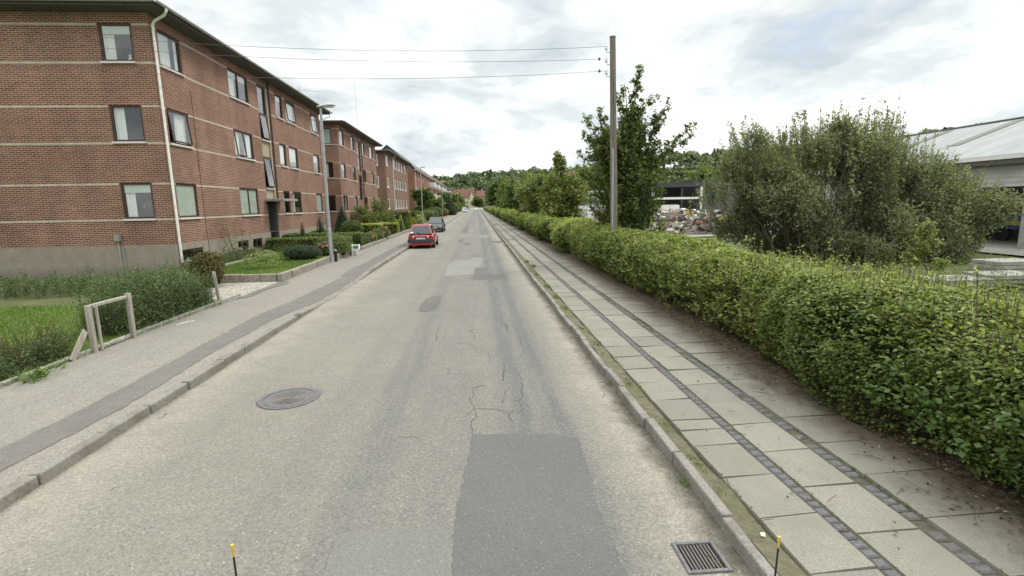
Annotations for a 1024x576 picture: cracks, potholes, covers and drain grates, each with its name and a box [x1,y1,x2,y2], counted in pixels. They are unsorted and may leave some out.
drain grate [671,540,733,575]
crack [447,302,524,431]
manhole cover [256,387,323,410]
